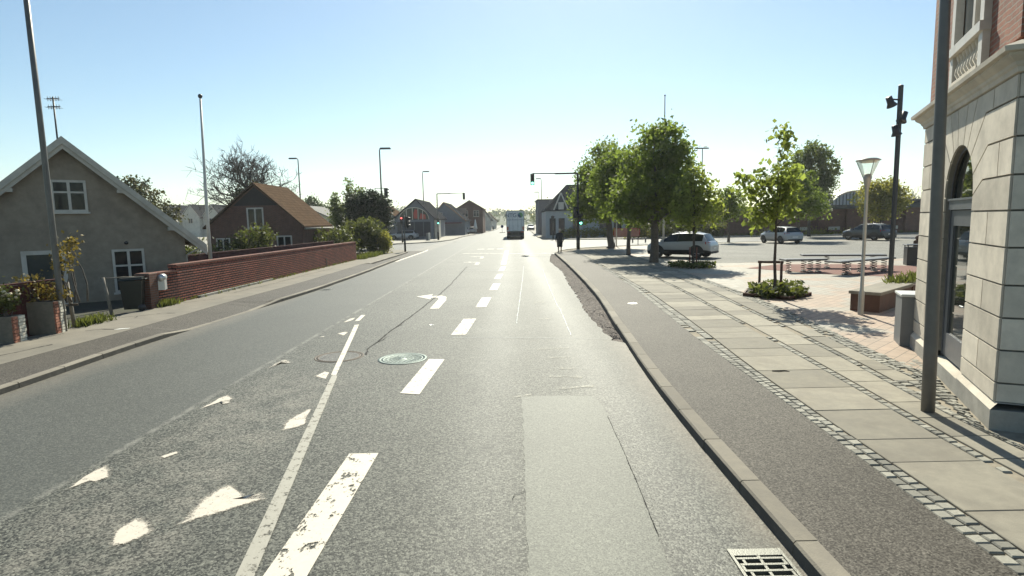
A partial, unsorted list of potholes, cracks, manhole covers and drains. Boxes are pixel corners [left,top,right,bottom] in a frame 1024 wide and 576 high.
crack [365,267,467,354]
manhole cover [314,351,364,362]
drain grate [727,548,802,576]
manhole cover [378,353,427,365]
